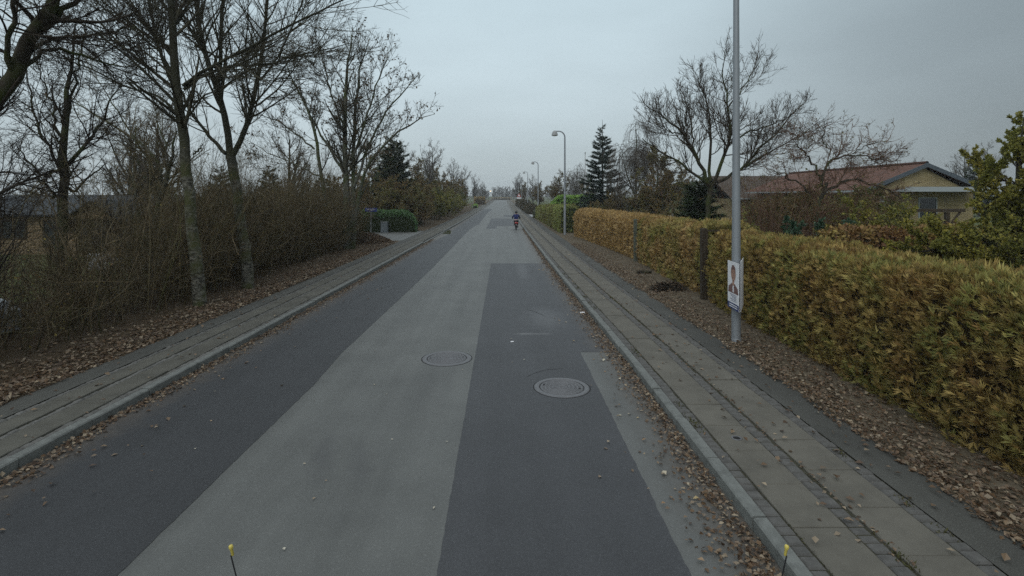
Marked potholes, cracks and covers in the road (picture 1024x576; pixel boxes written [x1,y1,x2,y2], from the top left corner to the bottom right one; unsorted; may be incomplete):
manhole cover [533,378,591,398]
manhole cover [421,351,472,366]
